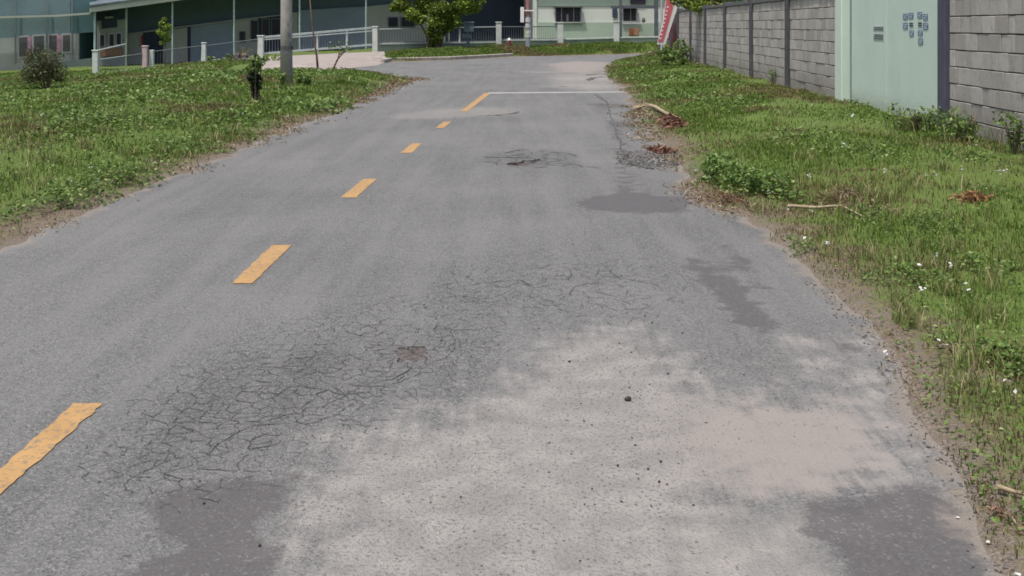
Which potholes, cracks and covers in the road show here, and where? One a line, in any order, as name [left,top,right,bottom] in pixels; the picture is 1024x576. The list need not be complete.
crack [390,242,694,325]
crack [79,291,510,511]
pothole [394,346,428,362]
crack [587,73,628,171]
